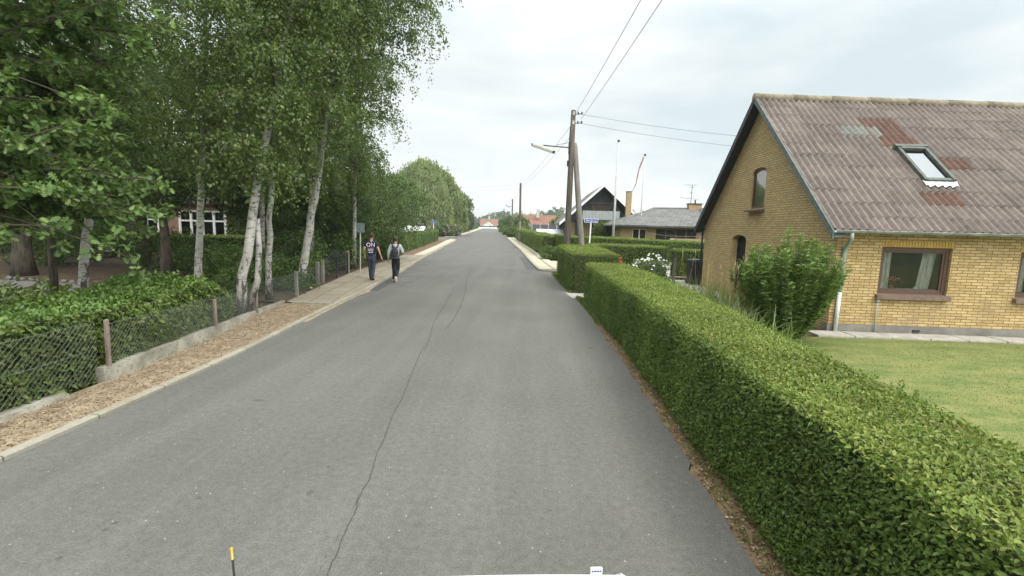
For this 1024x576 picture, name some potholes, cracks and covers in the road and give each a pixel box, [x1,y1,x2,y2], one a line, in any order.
crack [320,290,453,576]
